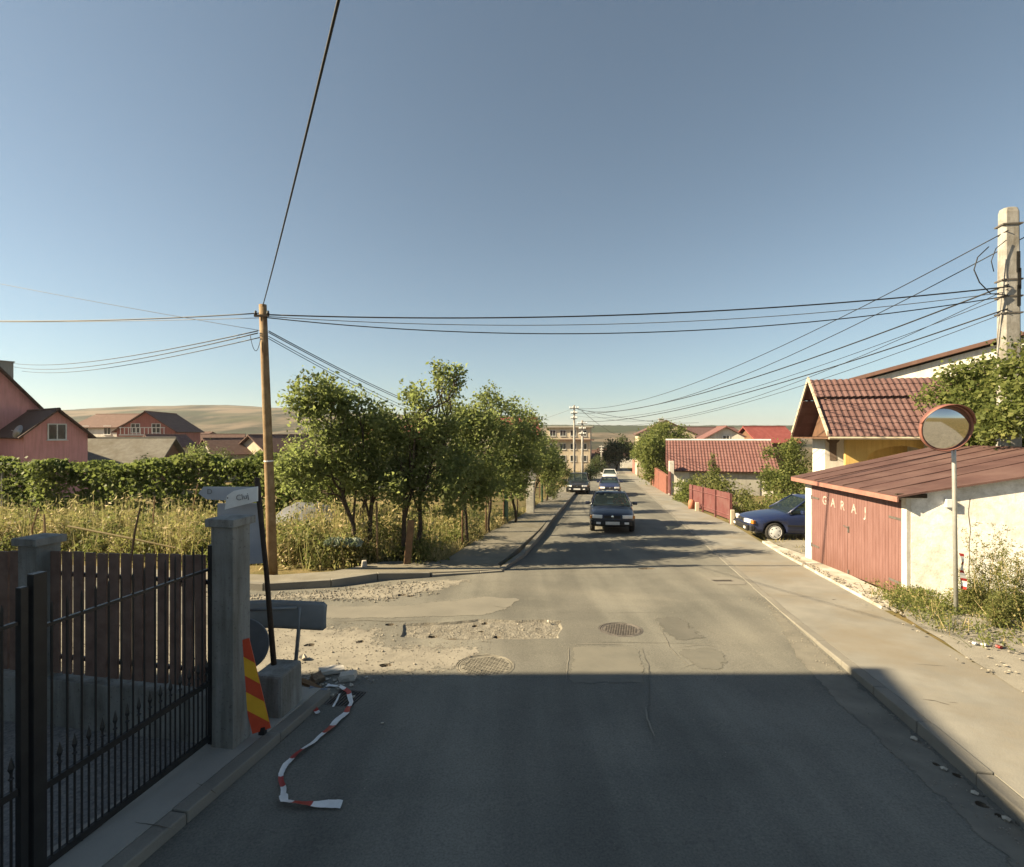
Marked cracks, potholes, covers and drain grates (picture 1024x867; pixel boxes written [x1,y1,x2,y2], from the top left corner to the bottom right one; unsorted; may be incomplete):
drain grate [324,689,368,708]
pothole [400,619,562,640]
manhole cover [599,622,643,637]
manhole cover [456,654,515,678]
